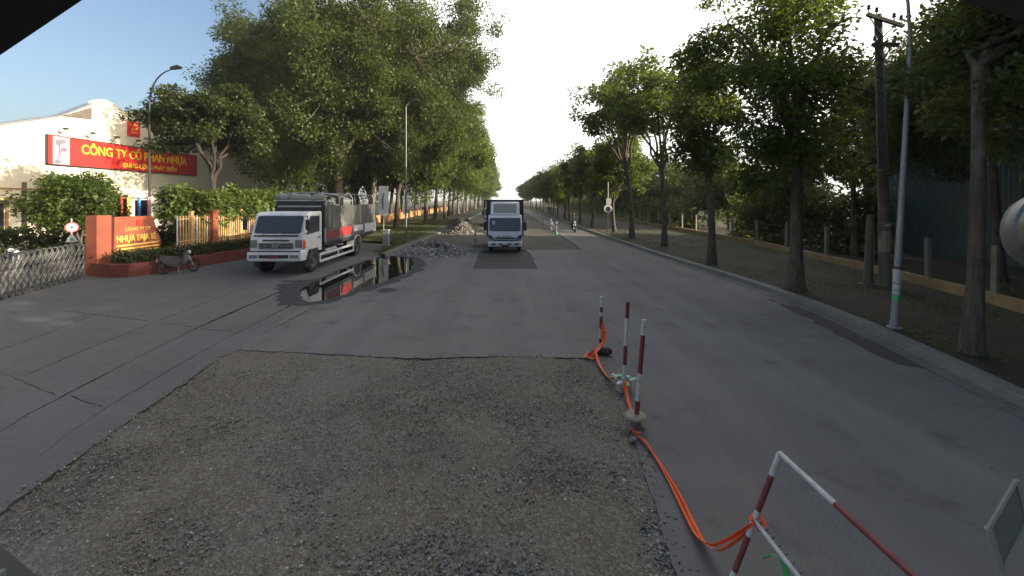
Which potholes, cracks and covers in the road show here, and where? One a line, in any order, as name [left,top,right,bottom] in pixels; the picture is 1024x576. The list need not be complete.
crack [0,290,317,457]
